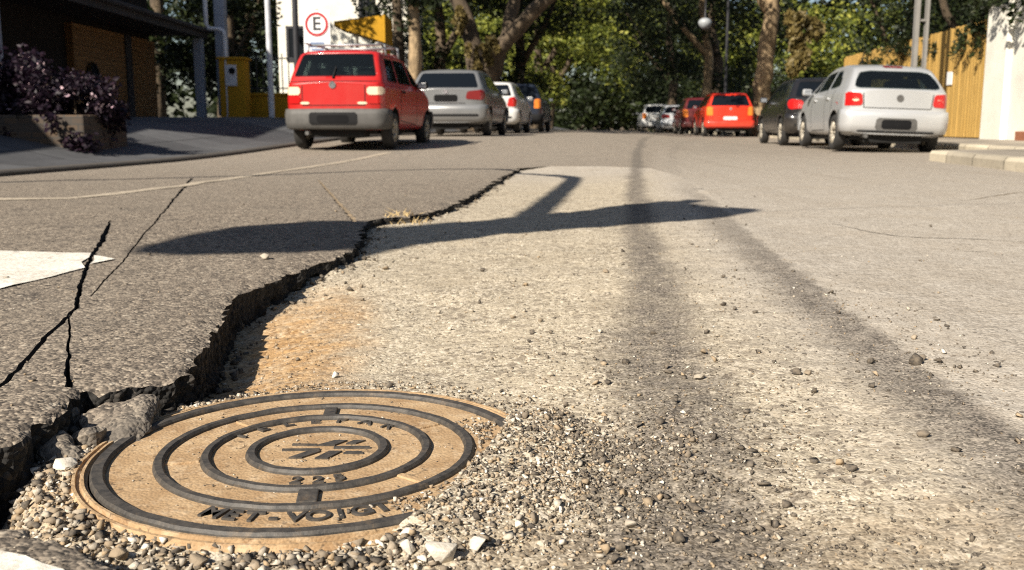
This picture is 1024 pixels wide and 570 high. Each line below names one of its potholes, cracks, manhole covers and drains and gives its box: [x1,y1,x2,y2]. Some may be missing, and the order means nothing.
crack [318,180,357,222]
crack [835,224,985,252]
manhole cover [68,389,510,555]
crack [0,179,193,388]
